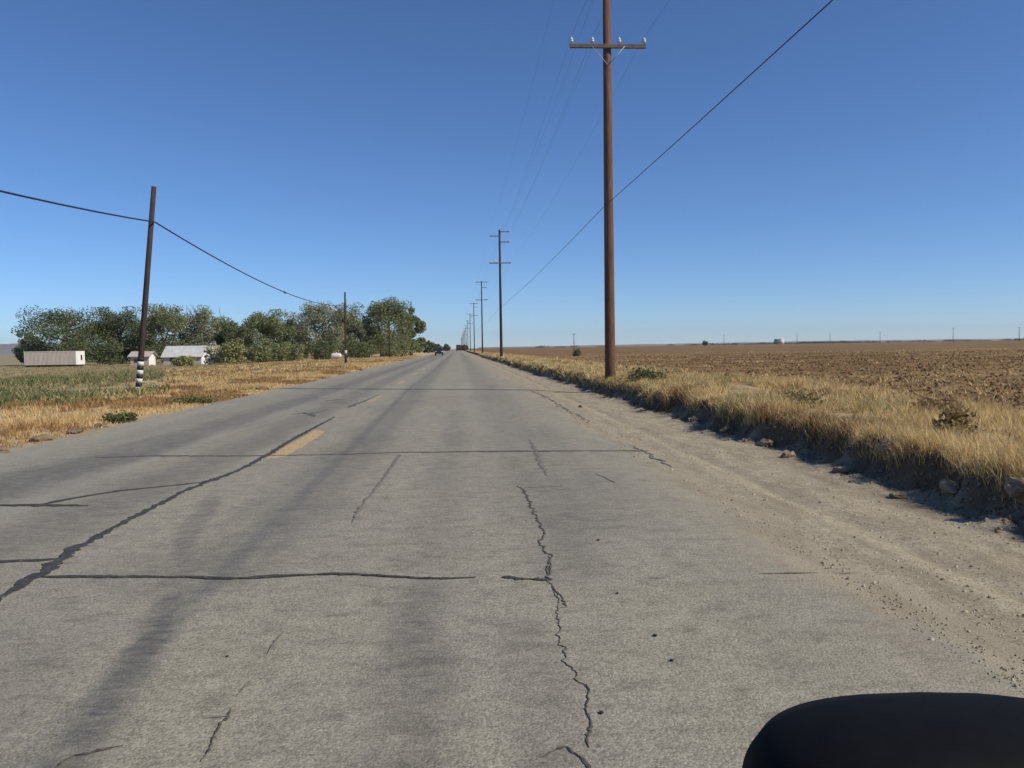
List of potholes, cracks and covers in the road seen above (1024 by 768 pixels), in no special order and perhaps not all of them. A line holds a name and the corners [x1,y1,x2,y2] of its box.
crack [94,440,671,768]
crack [531,390,590,423]
